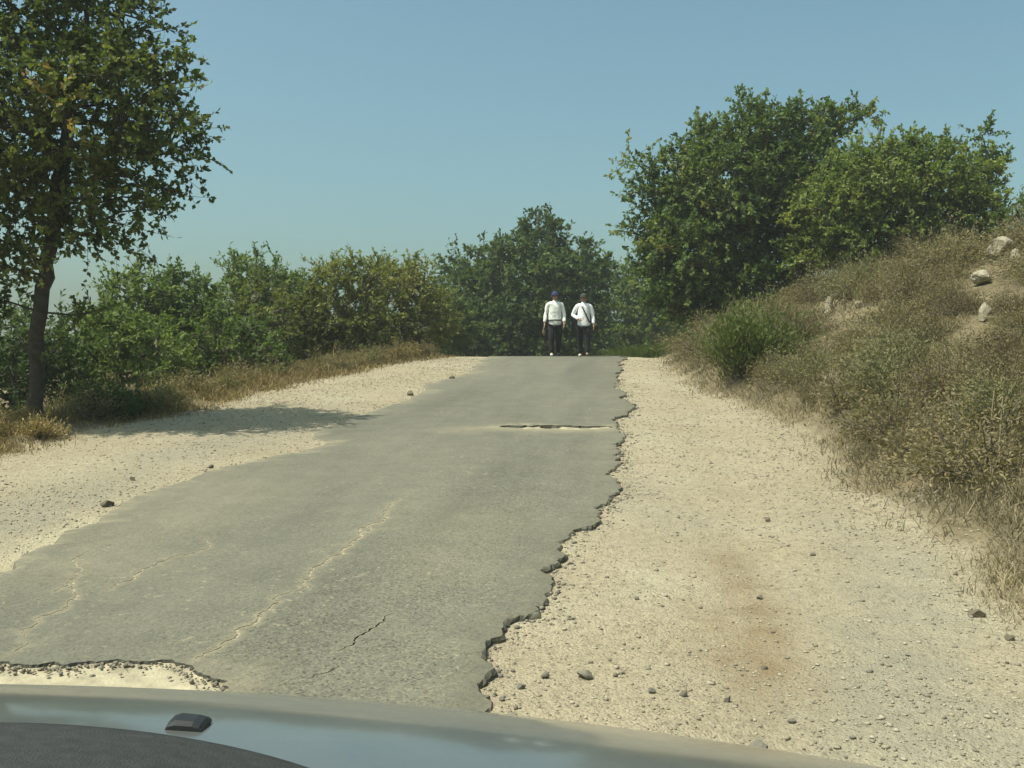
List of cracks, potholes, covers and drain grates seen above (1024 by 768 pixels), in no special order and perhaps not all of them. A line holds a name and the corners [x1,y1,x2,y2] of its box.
crack [111,540,211,590]
crack [14,552,85,652]
crack [310,613,393,678]
pothole [0,659,229,692]
crack [196,499,399,659]
